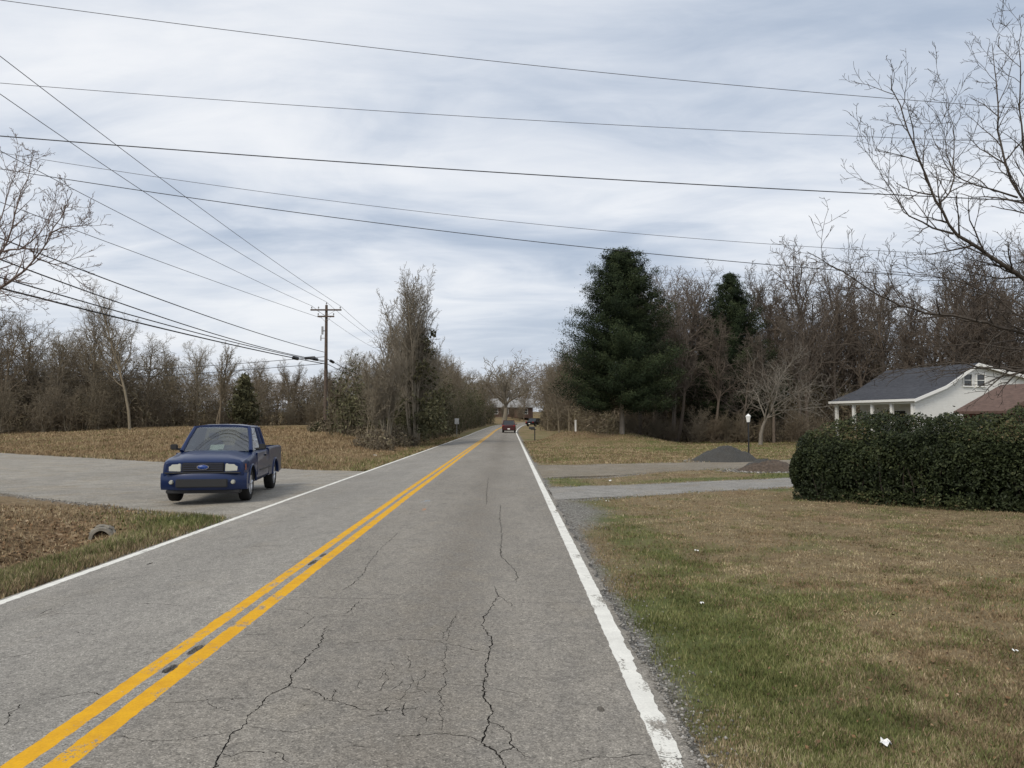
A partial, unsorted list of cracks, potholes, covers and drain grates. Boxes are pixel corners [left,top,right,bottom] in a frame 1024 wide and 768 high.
crack [122,478,531,768]
crack [574,754,695,762]
